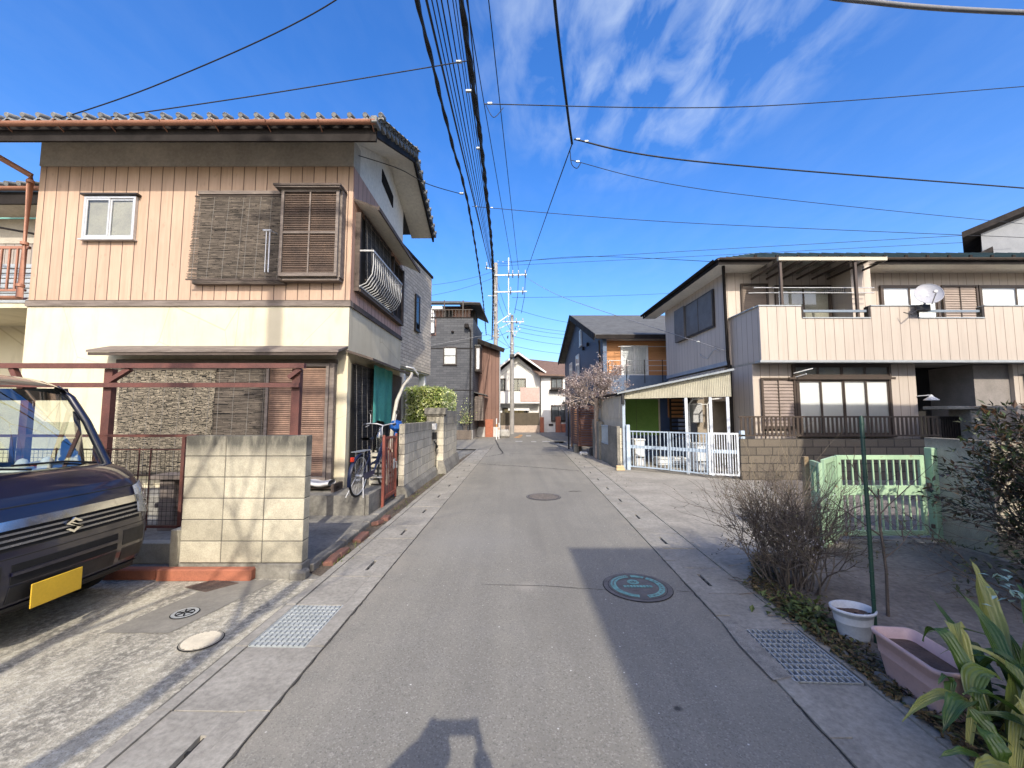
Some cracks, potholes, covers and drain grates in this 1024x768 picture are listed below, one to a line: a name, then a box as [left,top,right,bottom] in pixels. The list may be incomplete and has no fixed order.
drain grate [745,629,864,686]
manhole cover [603,573,674,602]
drain grate [248,605,343,648]
utility cover [169,607,200,619]
